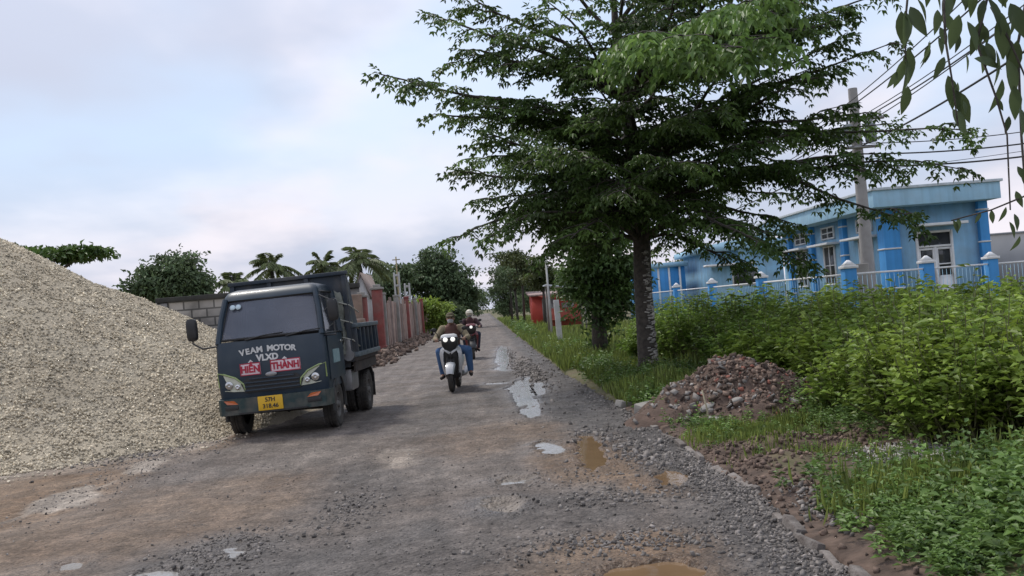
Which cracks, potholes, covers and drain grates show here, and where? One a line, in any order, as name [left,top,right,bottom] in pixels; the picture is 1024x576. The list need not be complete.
pothole [599,555,711,576]
pothole [493,346,510,371]
pothole [503,375,543,418]
pothole [651,466,691,486]
pothole [211,540,251,558]
pothole [573,434,609,472]
pothole [532,381,548,396]
pothole [532,441,568,454]
pothole [53,559,90,571]
pothole [480,496,524,512]
